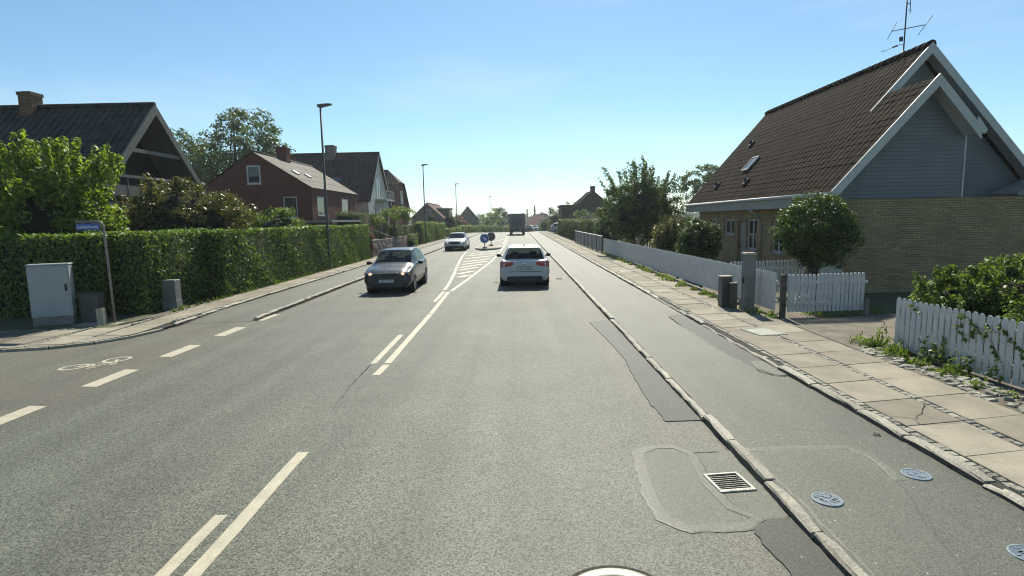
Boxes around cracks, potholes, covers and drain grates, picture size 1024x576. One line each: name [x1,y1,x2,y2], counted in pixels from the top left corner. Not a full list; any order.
manhole cover [811,492,844,507]
drain grate [703,472,757,493]
manhole cover [900,468,933,481]
manhole cover [1006,544,1024,561]
